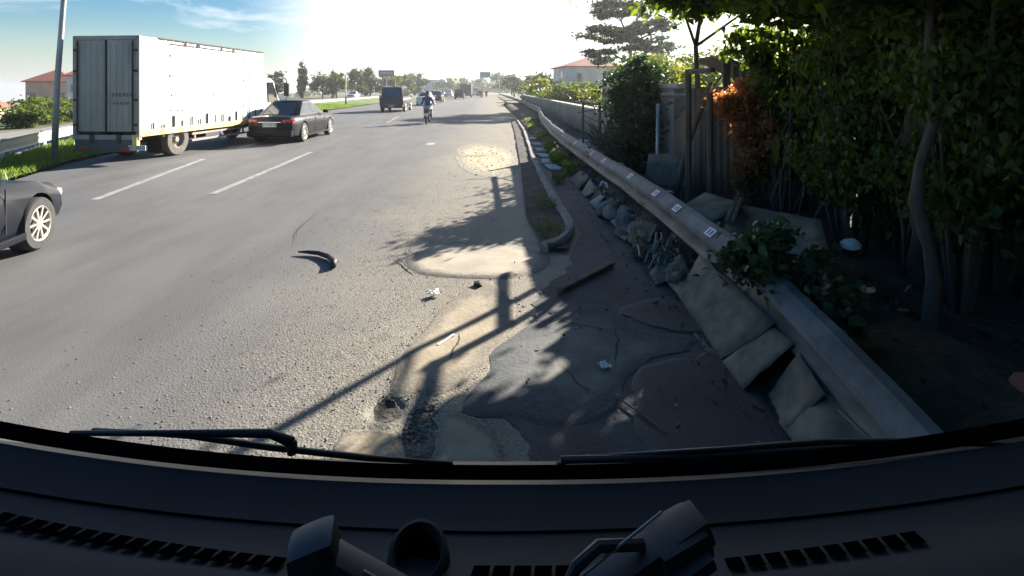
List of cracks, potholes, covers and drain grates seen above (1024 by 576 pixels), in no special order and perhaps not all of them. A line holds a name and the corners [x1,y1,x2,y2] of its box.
pothole [402,401,440,459]
crack [549,315,619,359]
pothole [374,395,403,422]
